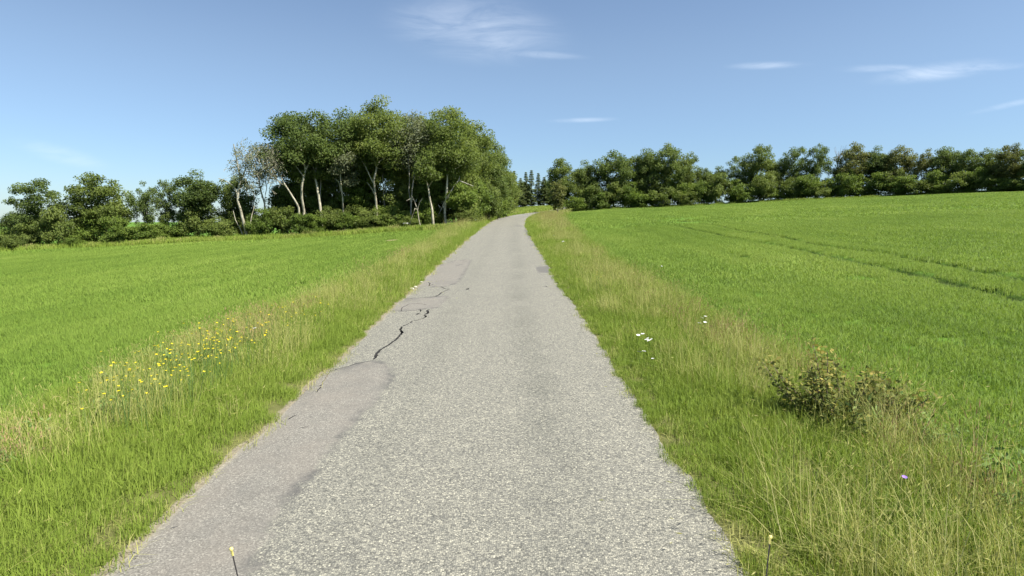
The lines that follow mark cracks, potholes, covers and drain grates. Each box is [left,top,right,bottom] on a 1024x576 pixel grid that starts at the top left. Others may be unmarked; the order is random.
crack [317,282,449,392]
